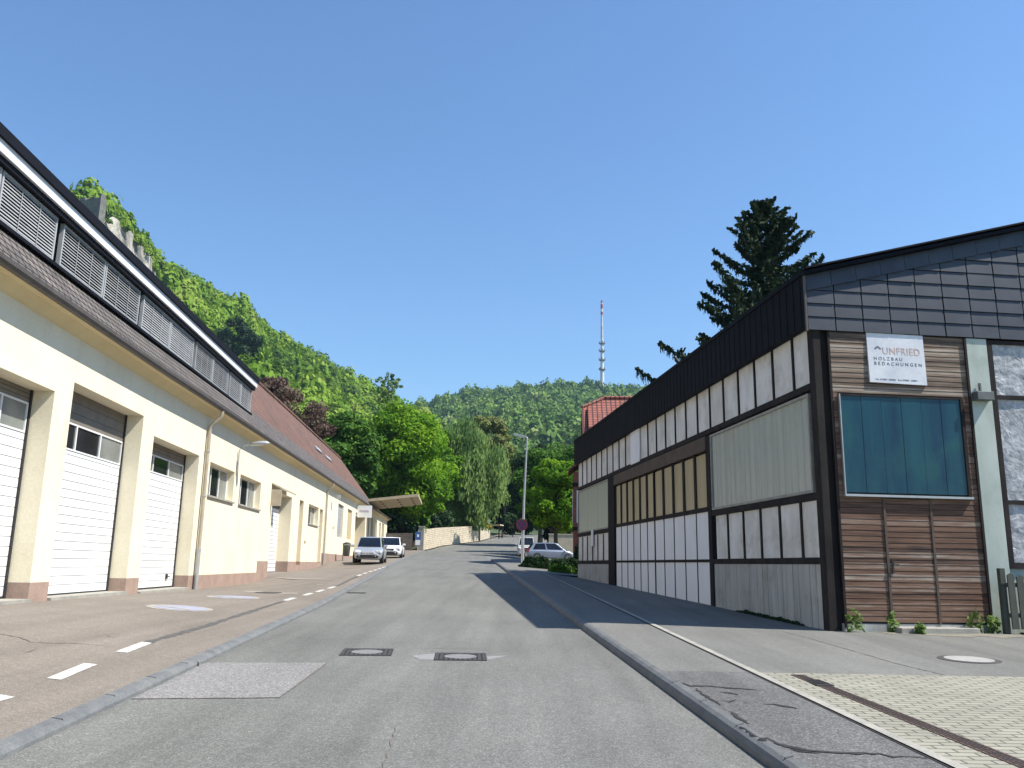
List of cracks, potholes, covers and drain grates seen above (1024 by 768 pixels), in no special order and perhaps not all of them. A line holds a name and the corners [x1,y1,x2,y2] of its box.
manhole cover [937,655,1002,664]
crack [680,682,926,758]
manhole cover [339,648,394,656]
manhole cover [414,652,503,661]
